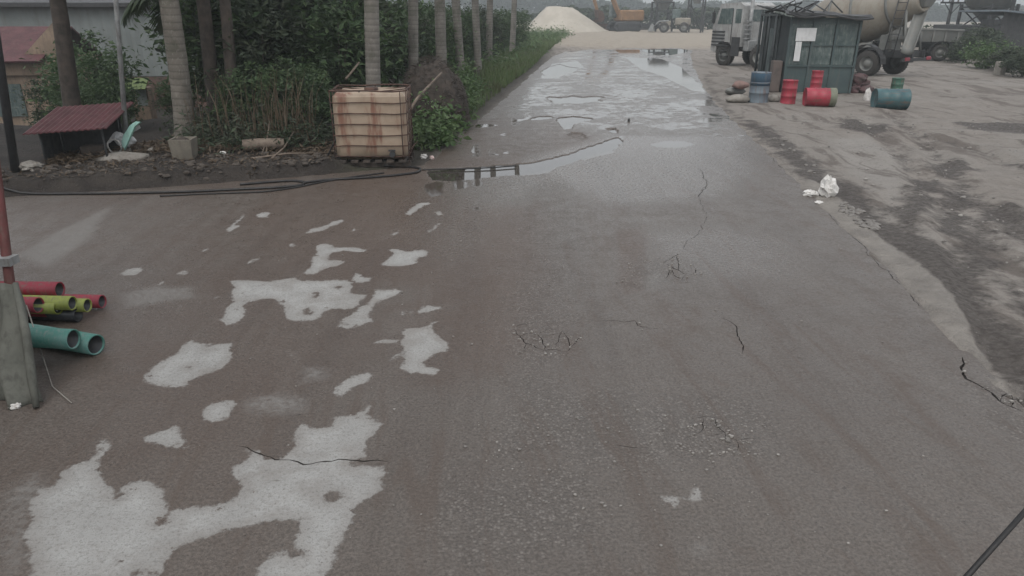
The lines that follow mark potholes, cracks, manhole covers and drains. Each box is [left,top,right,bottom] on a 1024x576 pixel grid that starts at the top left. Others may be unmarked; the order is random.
crack [515,323,579,352]
crack [698,416,751,451]
crack [665,171,707,279]
crack [242,446,387,465]
crack [960,358,1023,412]
